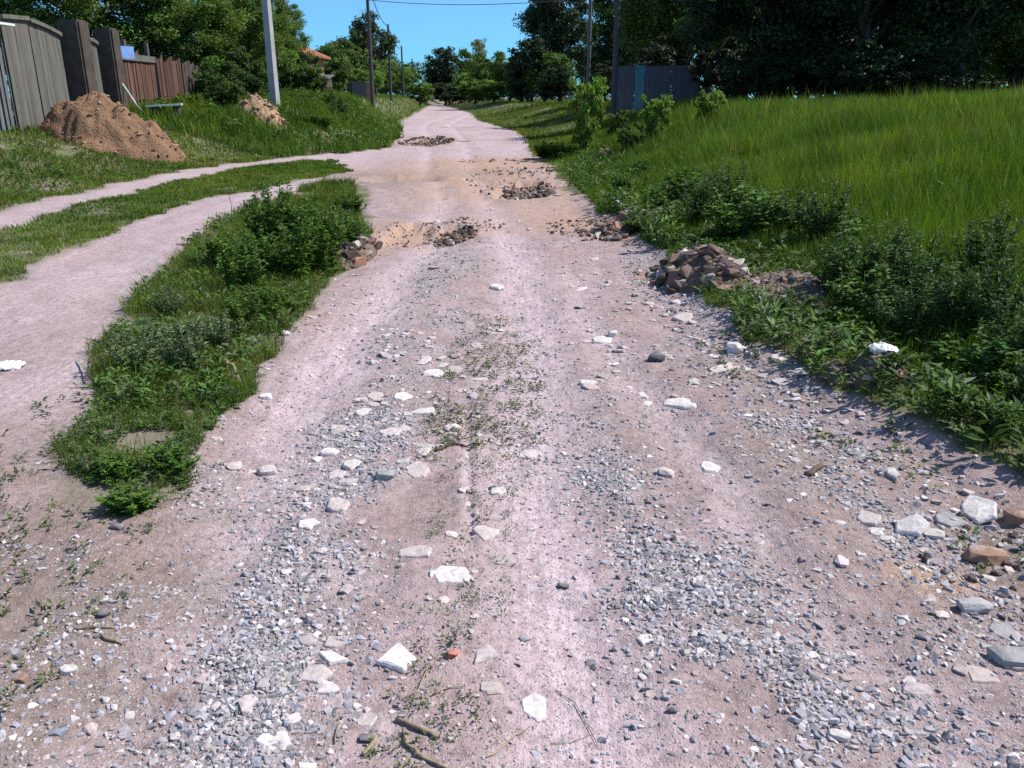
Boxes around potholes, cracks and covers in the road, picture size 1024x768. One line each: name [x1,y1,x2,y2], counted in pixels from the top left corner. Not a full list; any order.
pothole [490,180,554,200]
pothole [428,223,473,248]
pothole [376,221,438,248]
